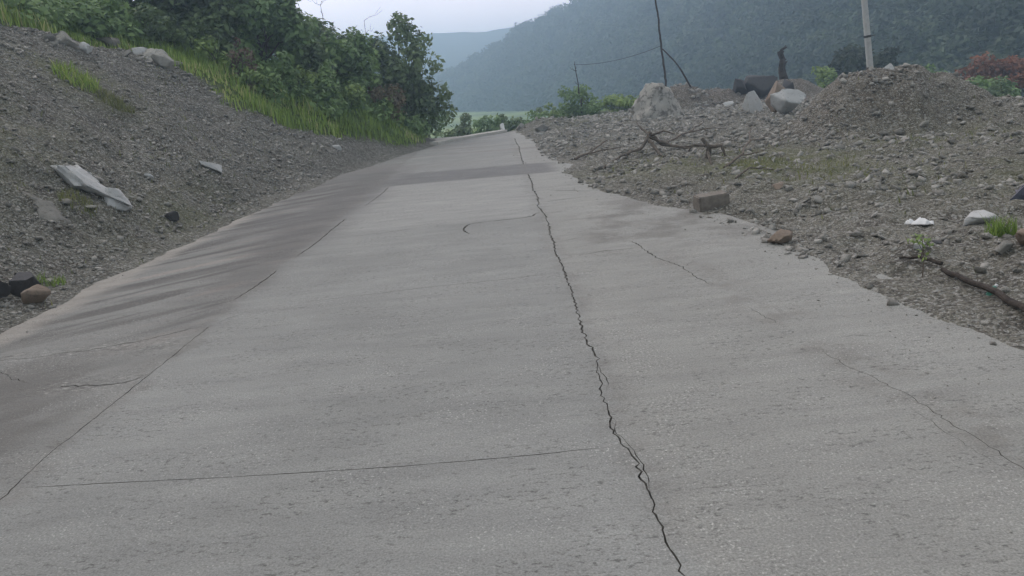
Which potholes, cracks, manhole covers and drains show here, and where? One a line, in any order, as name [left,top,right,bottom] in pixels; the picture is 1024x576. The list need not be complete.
crack [751,308,1024,475]
crack [294,139,706,576]
